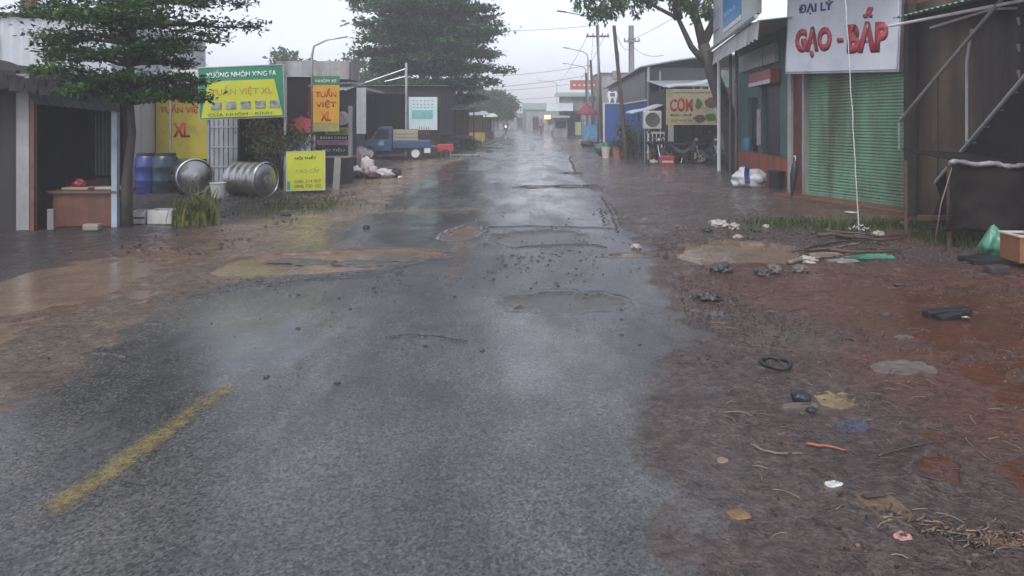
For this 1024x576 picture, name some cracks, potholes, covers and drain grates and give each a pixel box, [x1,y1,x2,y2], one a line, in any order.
pothole [493,289,636,317]
pothole [438,225,486,241]
pothole [662,239,806,271]
crack [488,196,622,249]
crack [551,152,596,171]
crack [390,333,468,342]
pothole [195,248,455,280]
pothole [485,228,597,250]
